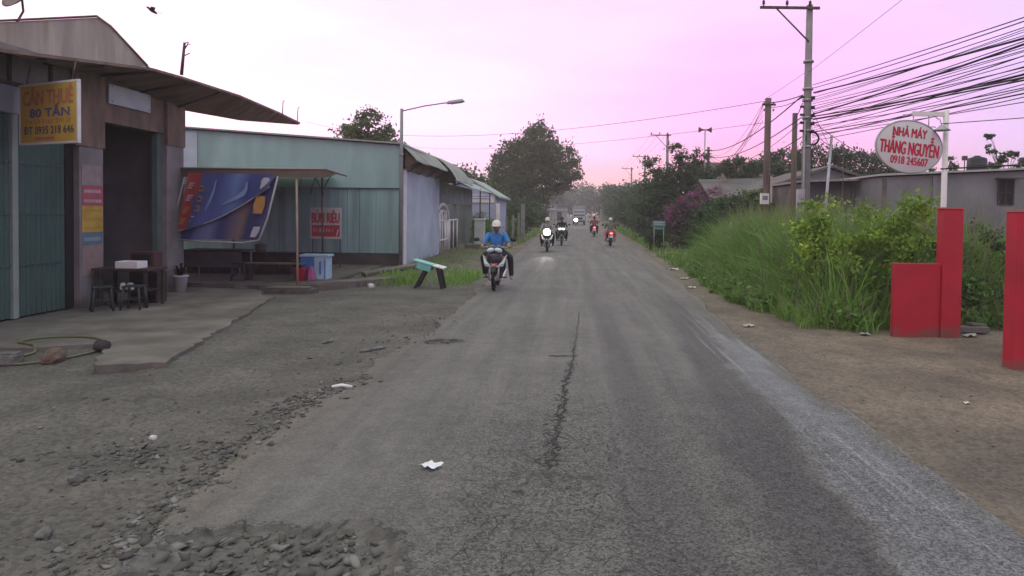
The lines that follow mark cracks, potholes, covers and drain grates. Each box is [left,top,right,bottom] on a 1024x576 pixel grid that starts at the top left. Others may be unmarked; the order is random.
crack [412,312,699,576]
